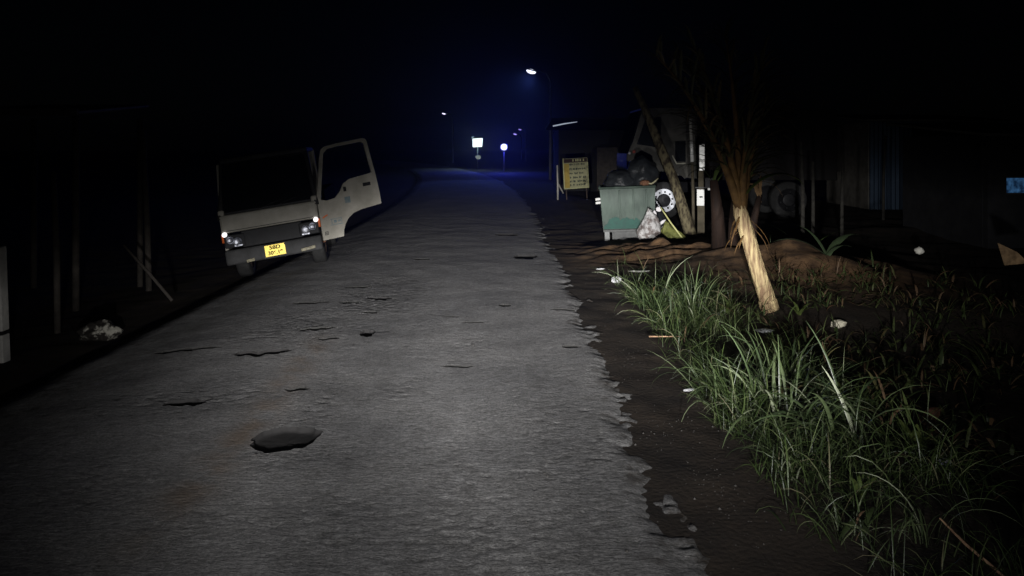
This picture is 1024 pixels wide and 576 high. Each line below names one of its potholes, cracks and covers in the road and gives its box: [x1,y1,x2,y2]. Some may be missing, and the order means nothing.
pothole [163,398,213,406]
pothole [250,426,323,453]
pothole [232,348,295,357]
